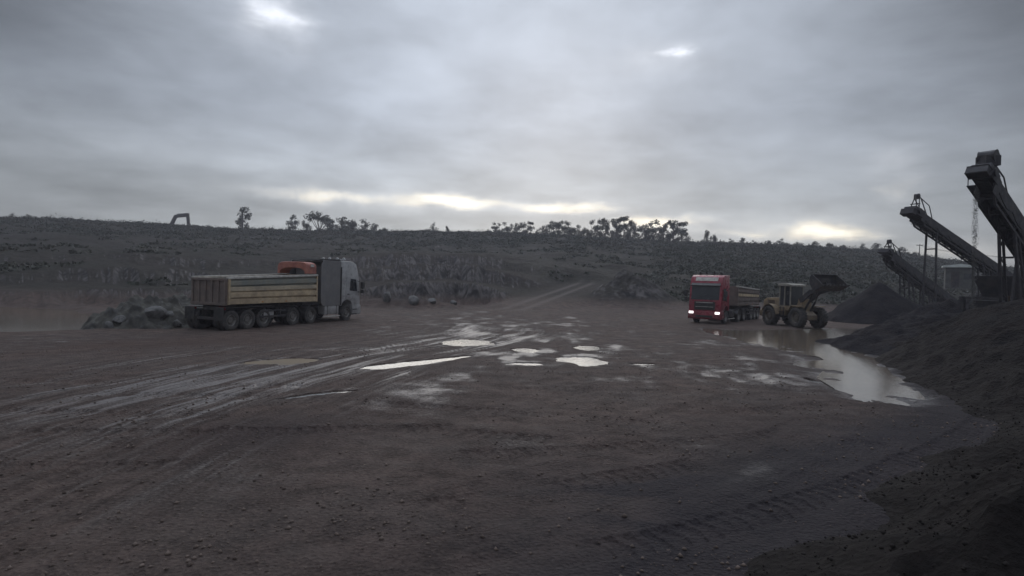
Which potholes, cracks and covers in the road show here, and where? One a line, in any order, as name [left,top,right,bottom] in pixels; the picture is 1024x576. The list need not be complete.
pothole [536,354,629,370]
pothole [426,338,508,348]
